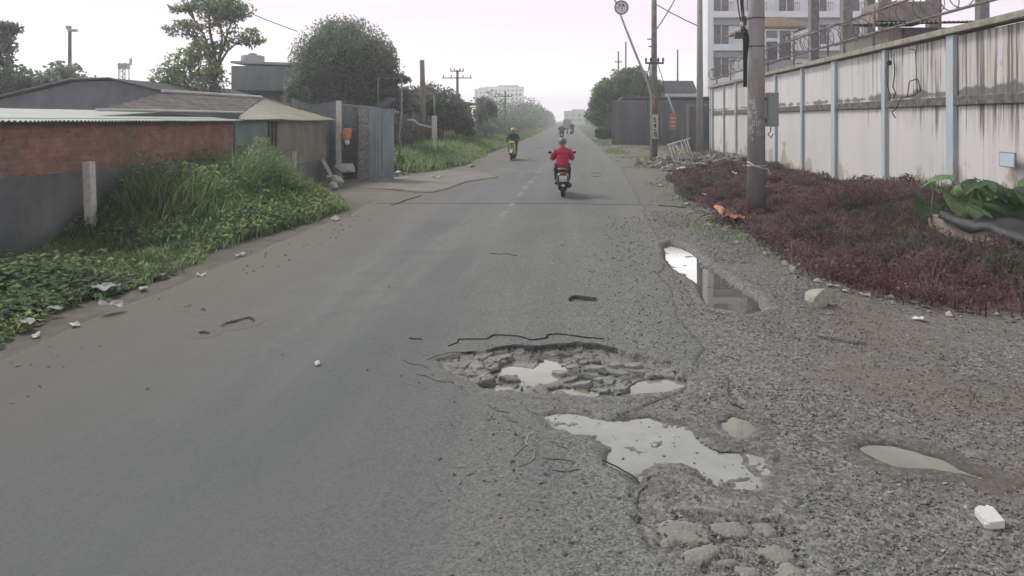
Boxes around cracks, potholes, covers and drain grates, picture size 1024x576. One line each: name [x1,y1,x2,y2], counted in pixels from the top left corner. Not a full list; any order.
pothole [421,338,710,403]
pothole [653,238,779,319]
pothole [828,432,1024,496]
crack [404,333,604,383]
pothole [505,399,824,508]
